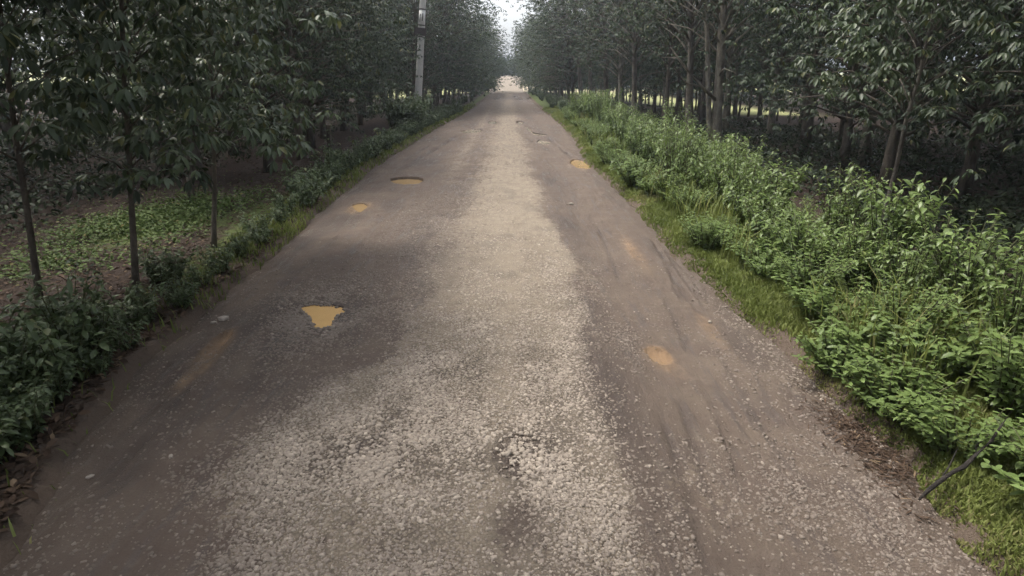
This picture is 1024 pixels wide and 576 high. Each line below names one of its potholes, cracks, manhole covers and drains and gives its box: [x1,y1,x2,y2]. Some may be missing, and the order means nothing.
pothole [348,202,373,214]
pothole [387,176,428,186]
pothole [294,301,352,333]
pothole [637,343,680,369]
pothole [566,158,594,170]
pothole [482,426,554,489]
pothole [523,125,549,137]
